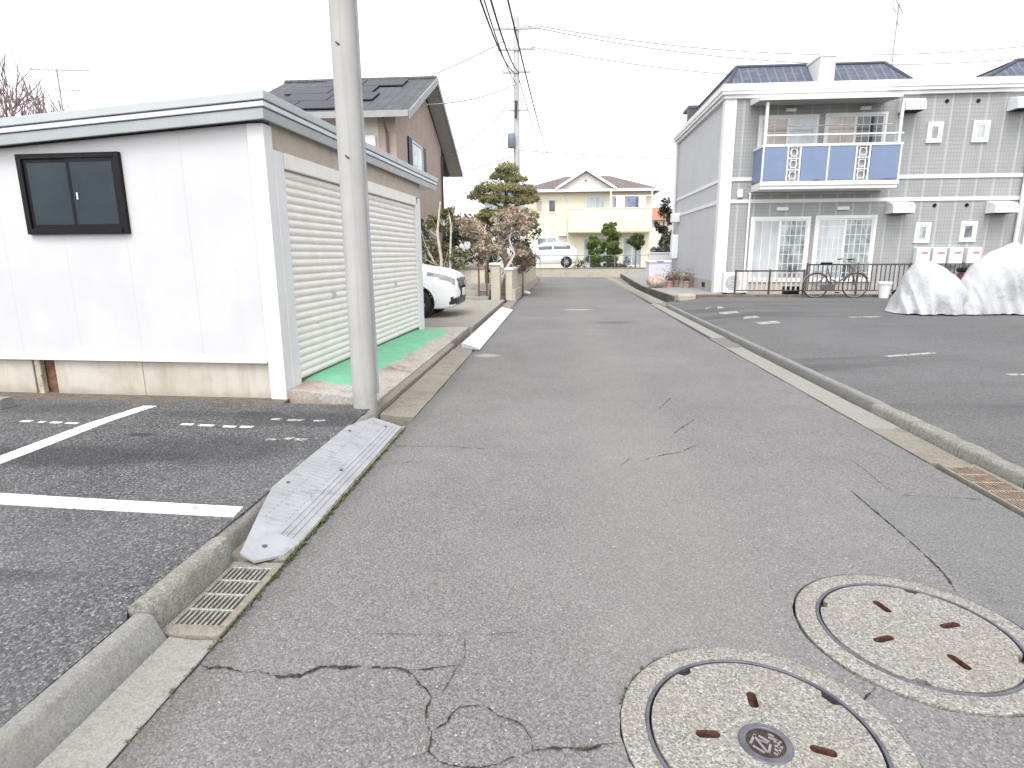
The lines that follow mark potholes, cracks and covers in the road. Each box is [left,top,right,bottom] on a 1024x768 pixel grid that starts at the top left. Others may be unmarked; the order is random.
drain grate [161,561,284,642]
drain grate [938,464,1024,518]
manhole cover [620,647,922,768]
manhole cover [794,575,1024,718]
crack [201,632,624,768]
